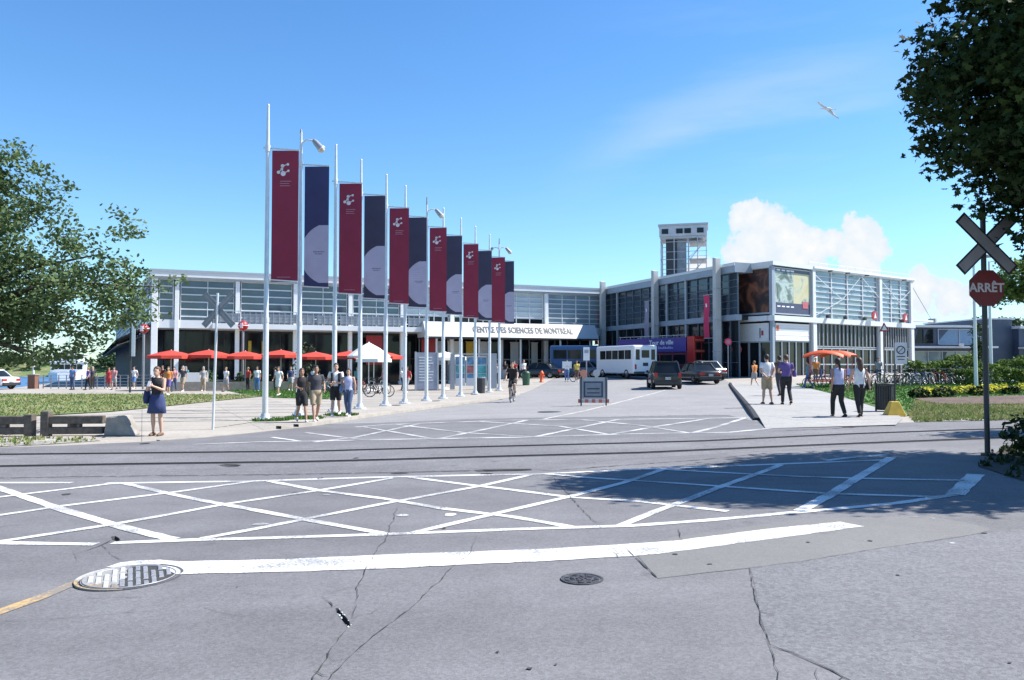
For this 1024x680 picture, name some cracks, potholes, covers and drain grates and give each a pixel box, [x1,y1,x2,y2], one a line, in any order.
crack [312,507,487,680]
manhole cover [561,573,604,585]
crack [749,567,850,680]
